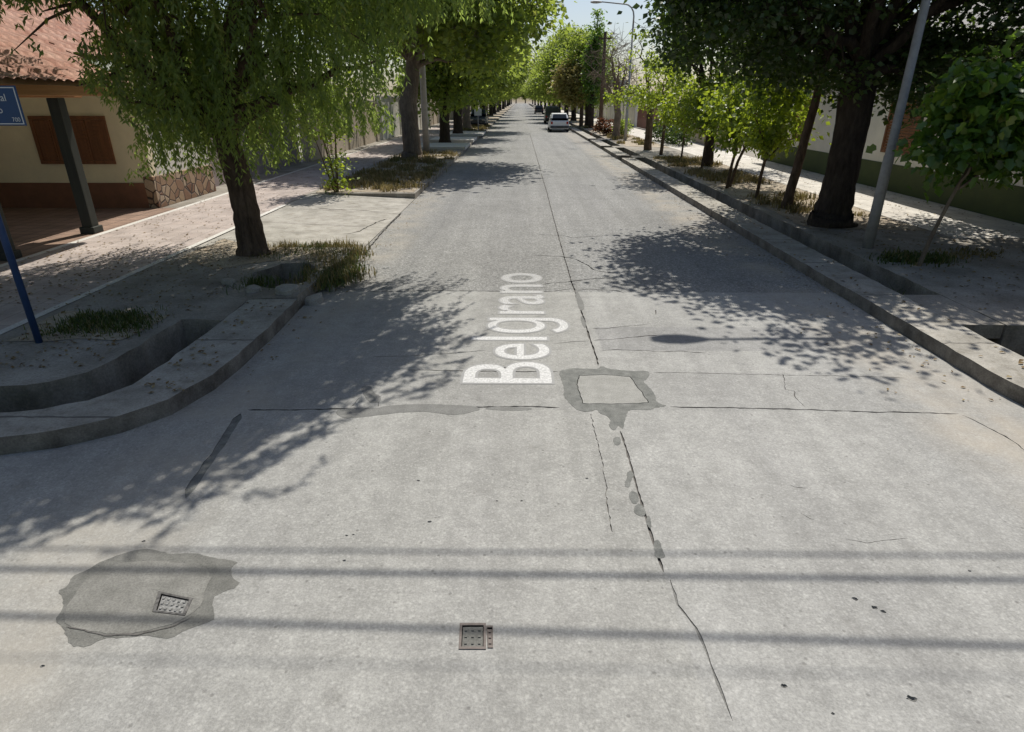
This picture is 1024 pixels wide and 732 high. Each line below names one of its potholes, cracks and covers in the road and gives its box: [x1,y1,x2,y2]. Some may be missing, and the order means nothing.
crack [591,418,612,531]
crack [657,372,1024,450]
